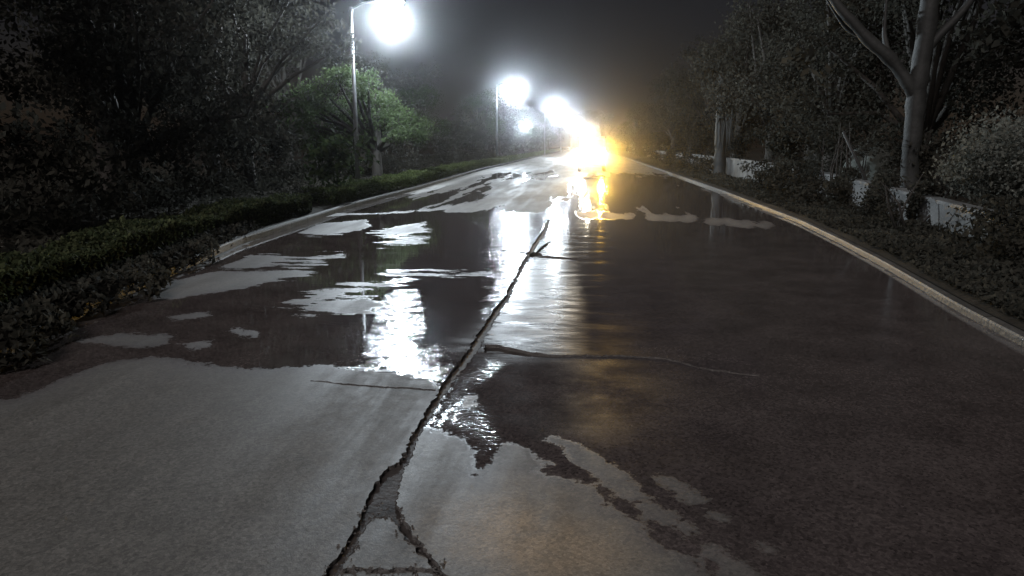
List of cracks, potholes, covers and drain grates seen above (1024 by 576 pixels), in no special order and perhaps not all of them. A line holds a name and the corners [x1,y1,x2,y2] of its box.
crack [311,219,760,576]
